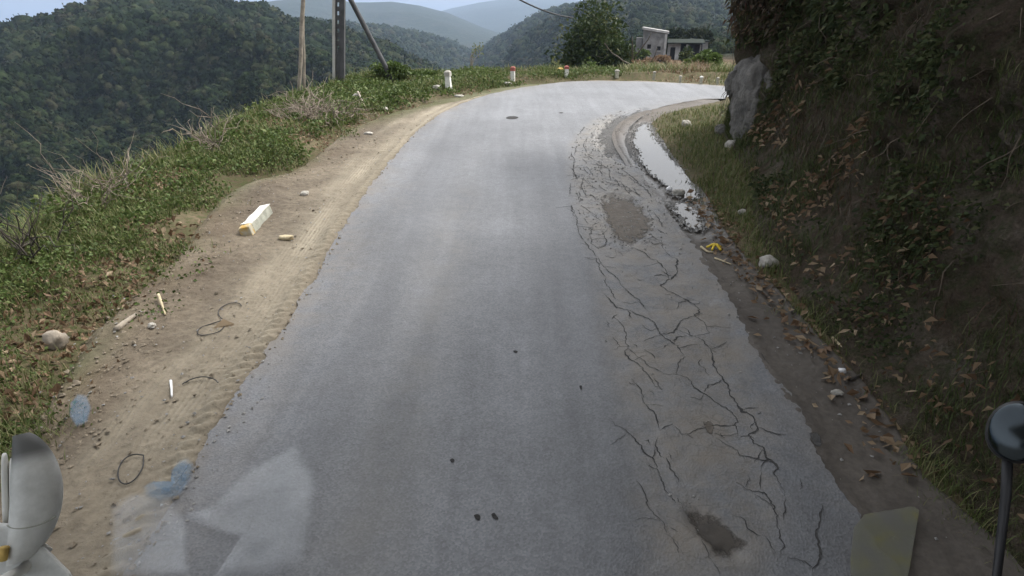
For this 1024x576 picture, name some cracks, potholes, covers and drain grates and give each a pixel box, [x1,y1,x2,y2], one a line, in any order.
crack [558,127,823,571]
pothole [687,512,745,557]
pothole [601,198,653,242]
